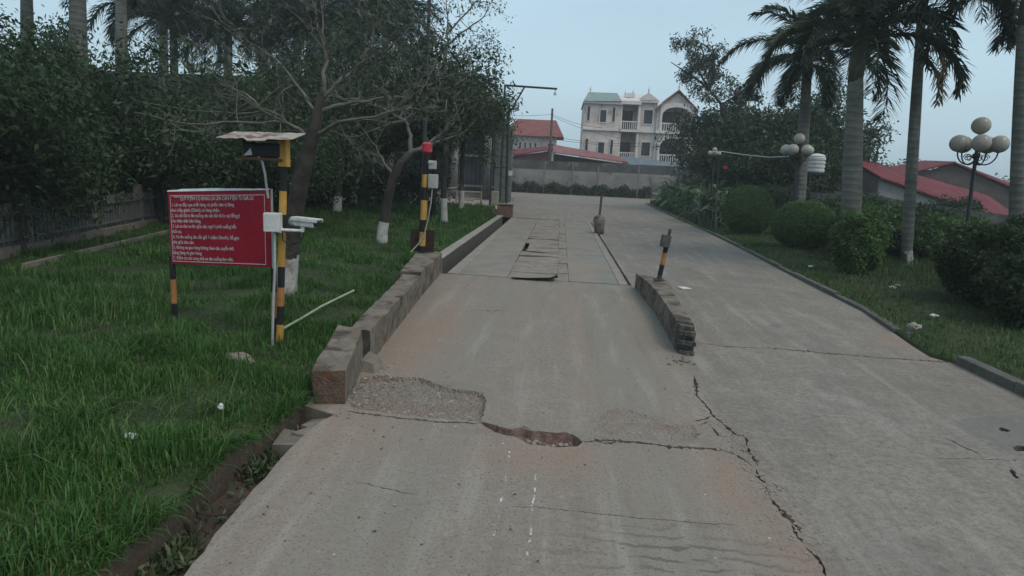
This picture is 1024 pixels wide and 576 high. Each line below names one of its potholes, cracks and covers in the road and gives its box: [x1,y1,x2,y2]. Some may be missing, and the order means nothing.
crack [345,376,826,576]
pothole [478,422,581,447]
